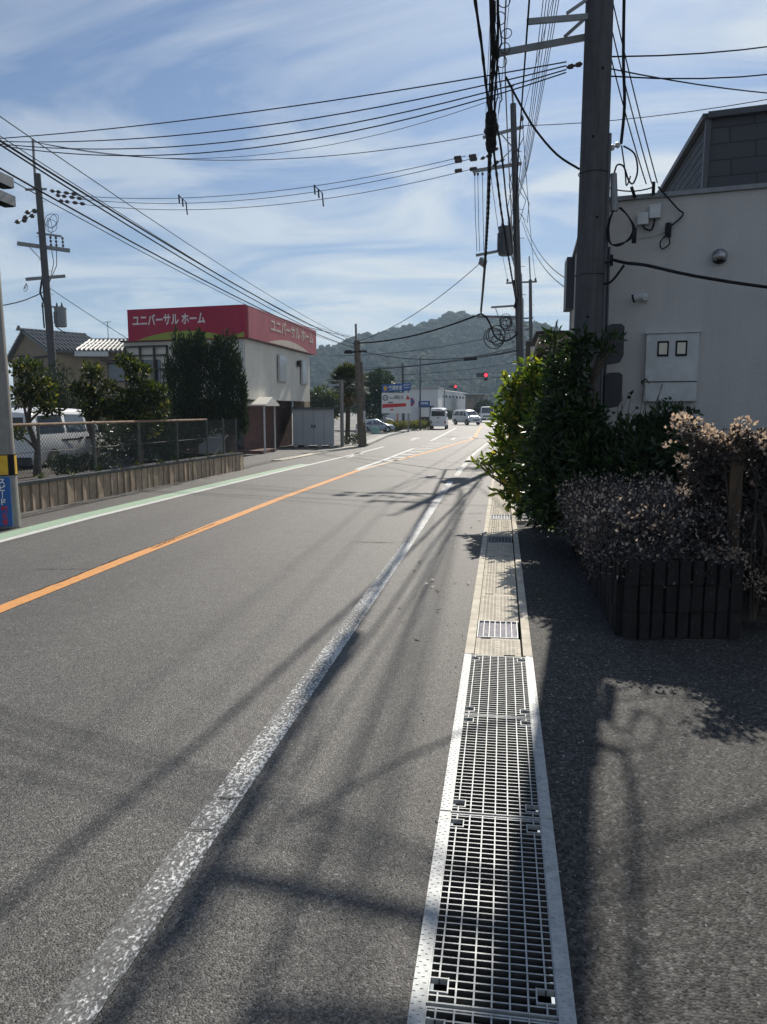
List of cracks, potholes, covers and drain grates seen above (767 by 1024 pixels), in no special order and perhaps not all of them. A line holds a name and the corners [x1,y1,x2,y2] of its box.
drain grate [463,655,531,718]
drain grate [426,813,559,1021]
drain grate [423,1006,559,1024]
drain grate [451,714,540,820]
drain grate [477,620,518,639]
